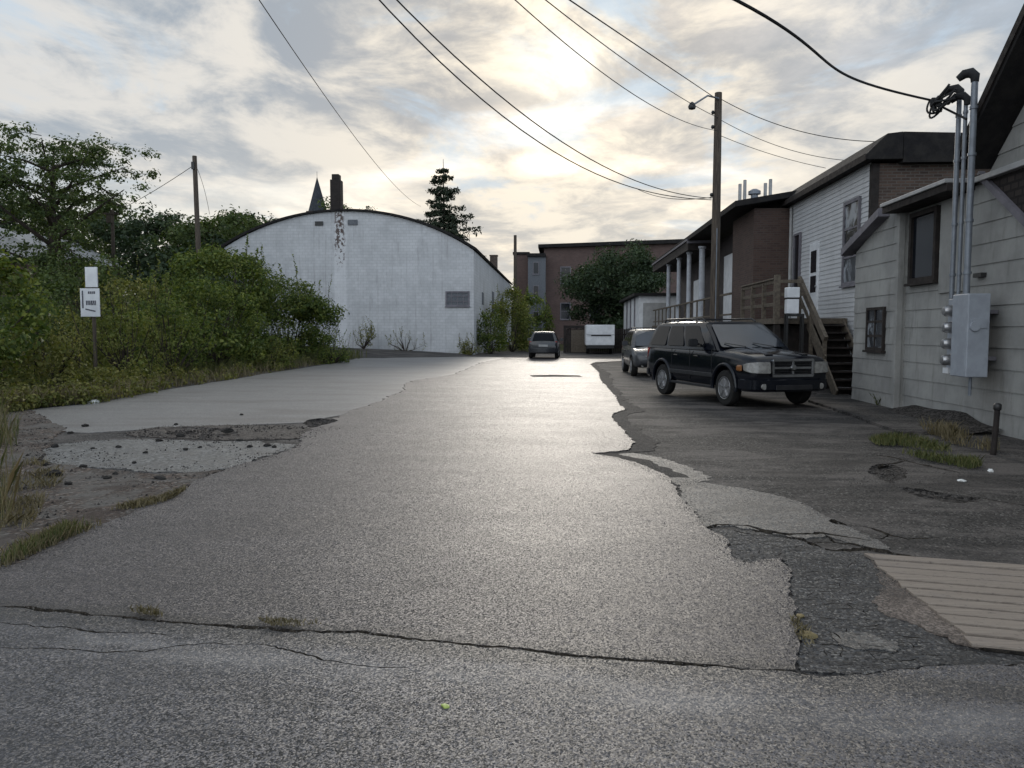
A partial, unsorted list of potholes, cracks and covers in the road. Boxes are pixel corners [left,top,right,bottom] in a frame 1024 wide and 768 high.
pothole [303,418,338,427]
crack [0,561,1018,675]
pothole [899,487,979,503]
crack [707,524,935,557]
pothole [163,427,240,439]
pothole [868,464,908,483]
